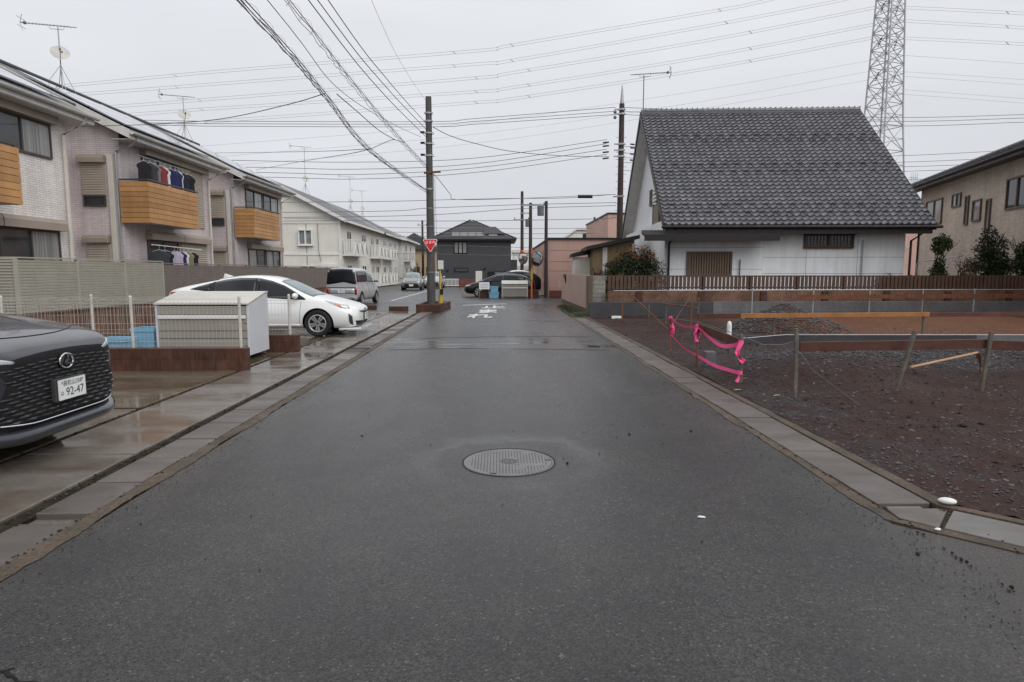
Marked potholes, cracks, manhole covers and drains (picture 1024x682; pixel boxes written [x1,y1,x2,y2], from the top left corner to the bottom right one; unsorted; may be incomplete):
manhole cover [462,448,556,477]
